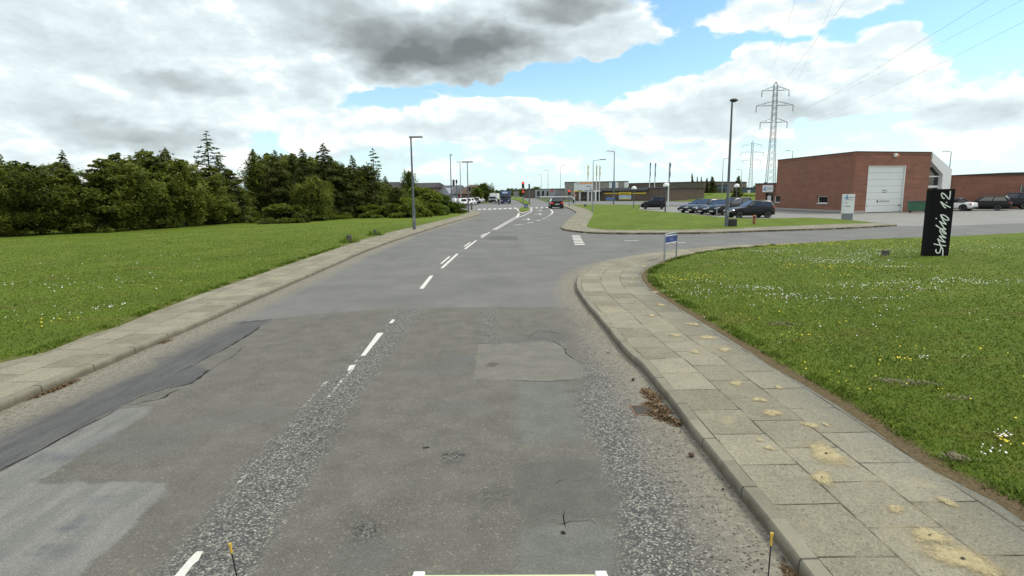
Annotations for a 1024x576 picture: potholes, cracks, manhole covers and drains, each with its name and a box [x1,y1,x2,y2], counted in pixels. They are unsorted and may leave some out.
pothole [353,523,378,538]
pothole [440,453,467,461]
